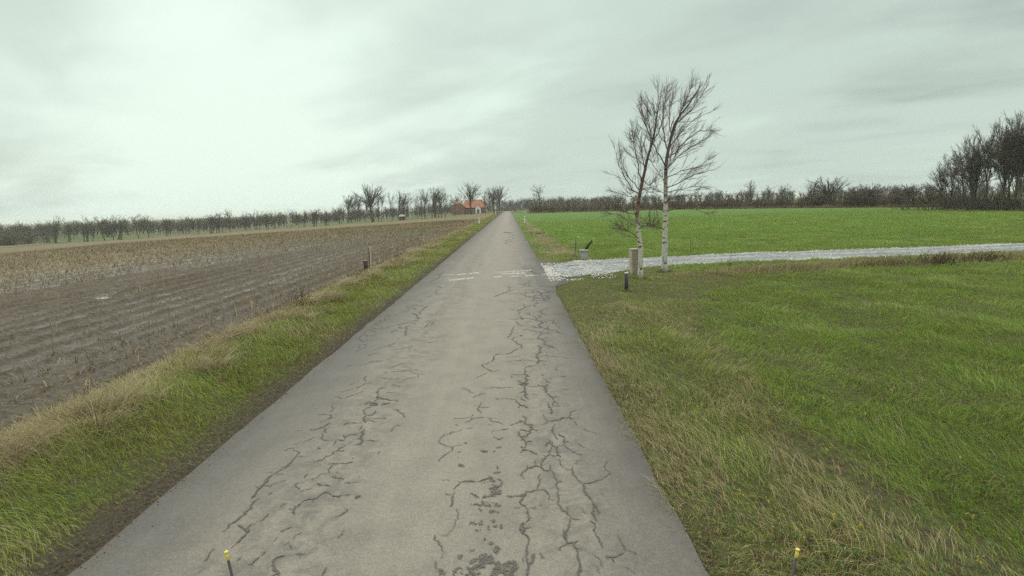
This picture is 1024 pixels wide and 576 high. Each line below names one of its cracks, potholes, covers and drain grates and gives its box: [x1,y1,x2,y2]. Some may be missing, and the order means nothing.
pothole [452,553,519,576]
crack [204,272,443,576]
crack [433,280,637,575]
